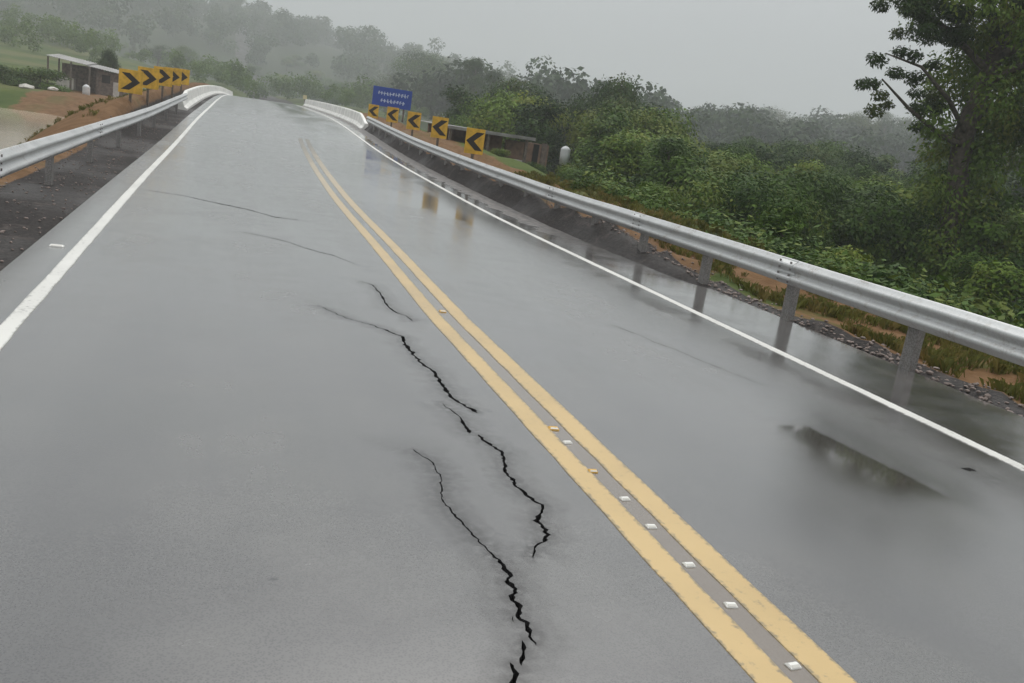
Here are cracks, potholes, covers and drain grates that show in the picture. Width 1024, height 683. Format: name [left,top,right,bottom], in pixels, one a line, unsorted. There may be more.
crack [319,283,551,683]
